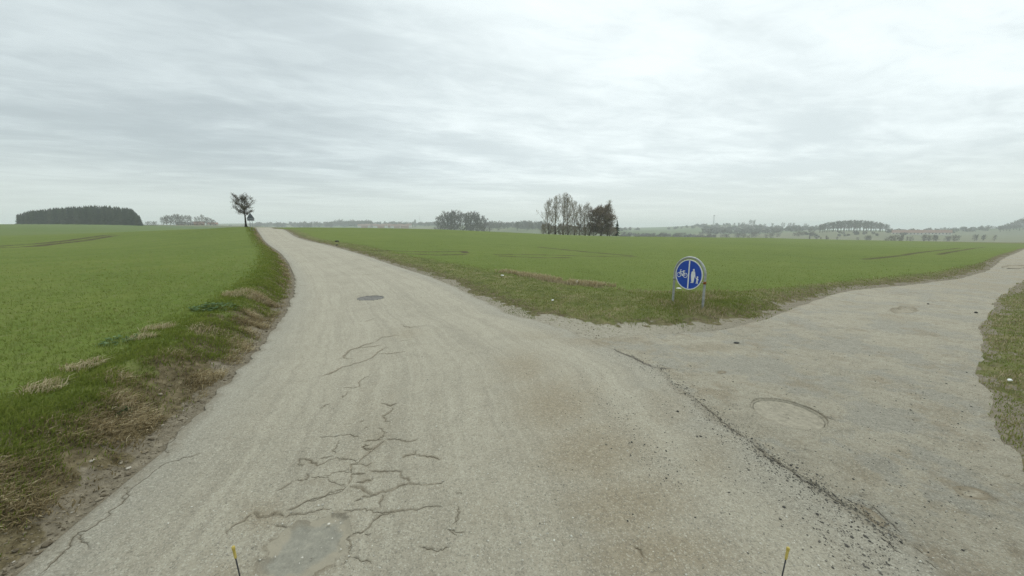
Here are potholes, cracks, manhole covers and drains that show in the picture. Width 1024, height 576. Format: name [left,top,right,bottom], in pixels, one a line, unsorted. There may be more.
manhole cover [751,399,828,430]
crack [43,423,195,572]
crack [226,403,465,564]
crack [320,326,417,409]
